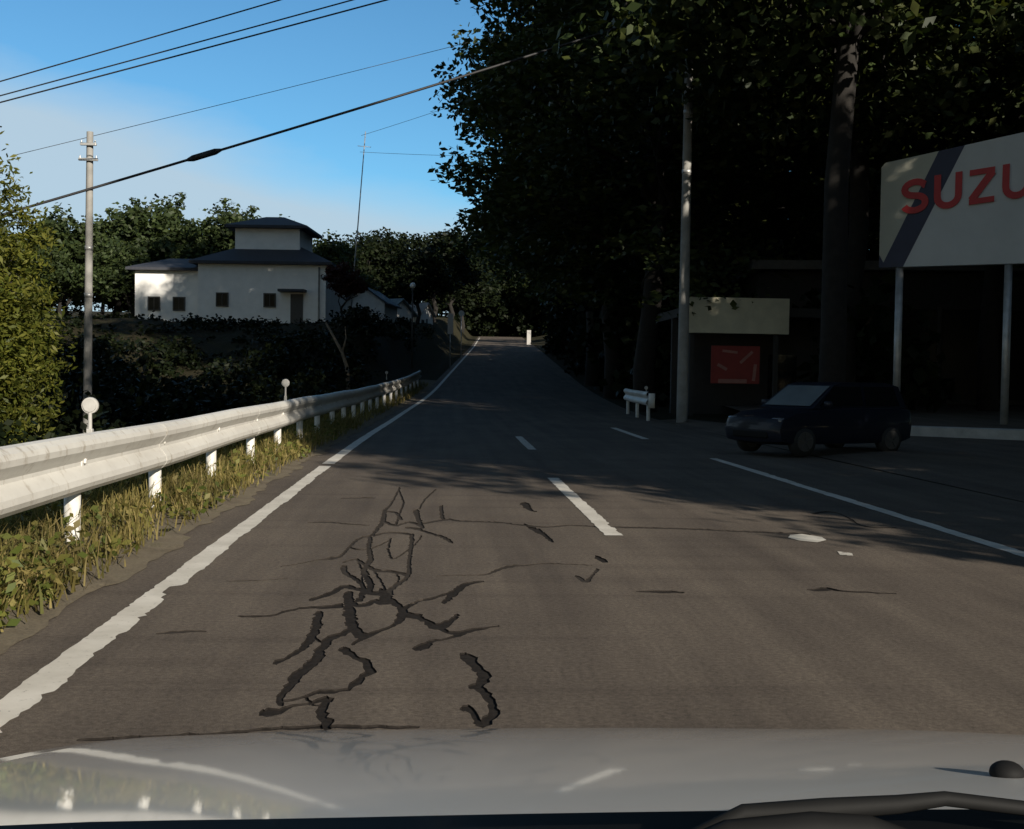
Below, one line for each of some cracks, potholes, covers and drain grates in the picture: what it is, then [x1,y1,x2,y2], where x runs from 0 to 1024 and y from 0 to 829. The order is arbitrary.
crack [76,487,896,741]
